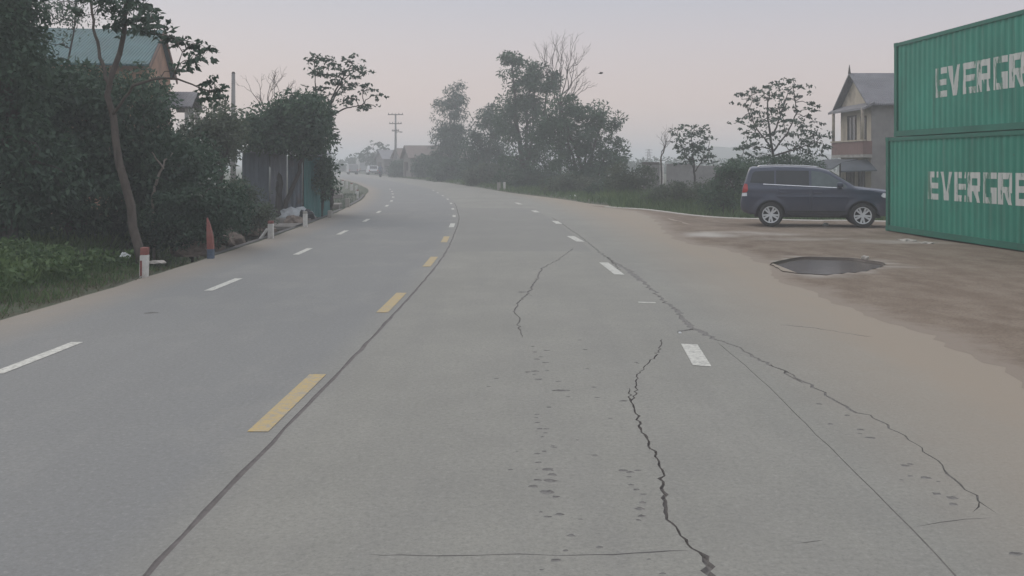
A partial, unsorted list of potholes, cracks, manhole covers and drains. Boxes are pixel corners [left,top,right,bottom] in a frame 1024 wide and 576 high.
pothole [770,257,885,275]
crack [513,218,996,576]
